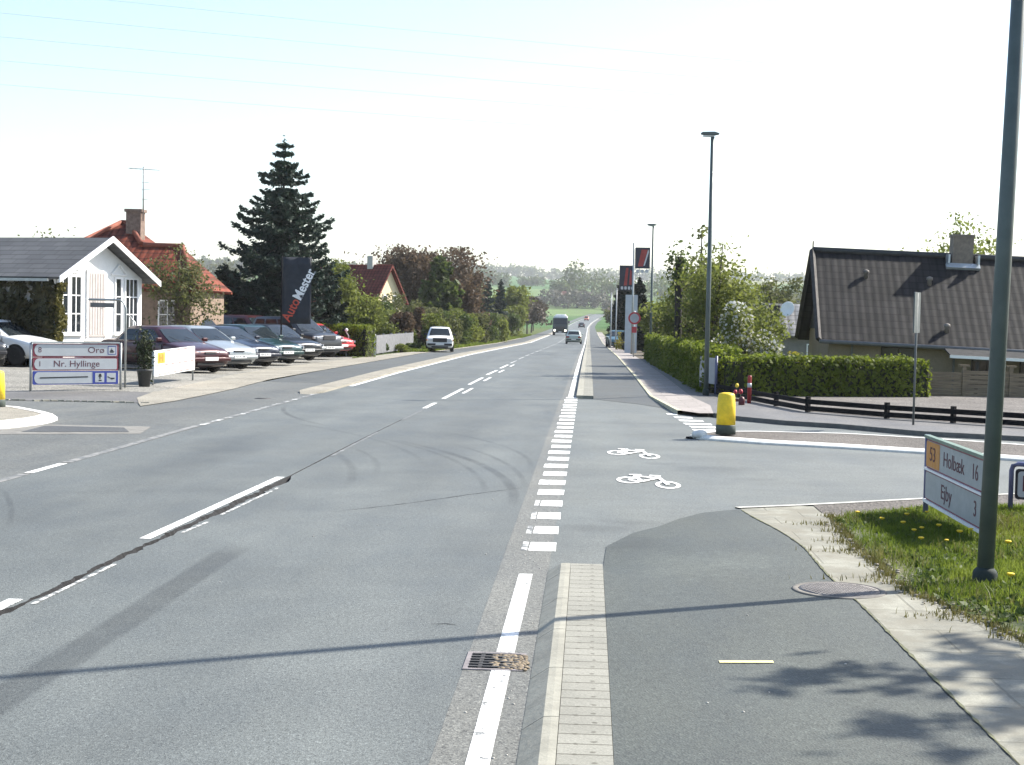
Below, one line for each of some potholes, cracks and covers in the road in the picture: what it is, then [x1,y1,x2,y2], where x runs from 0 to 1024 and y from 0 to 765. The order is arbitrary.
drain grate [462,651,530,672]
manhole cover [792,581,887,599]
